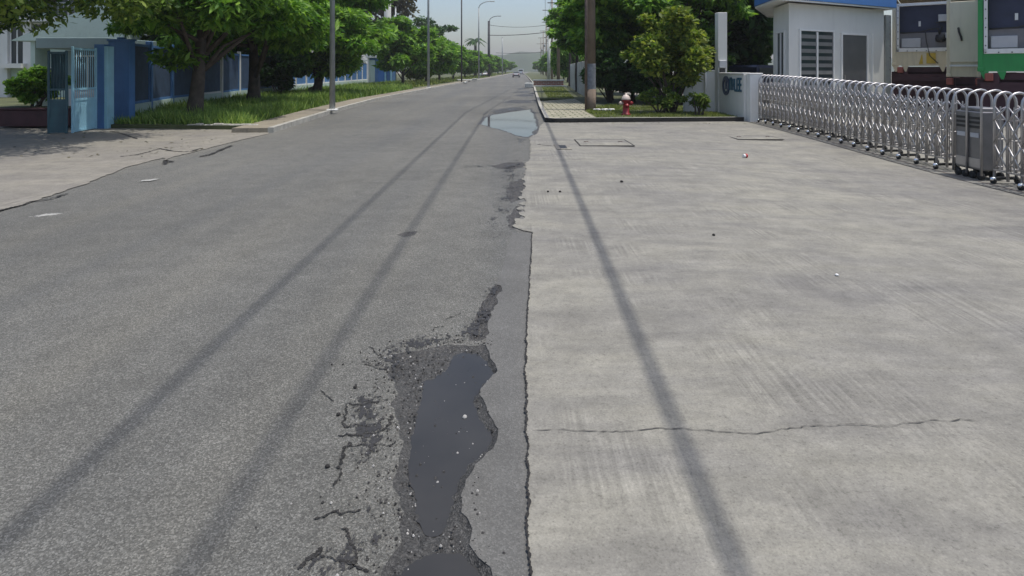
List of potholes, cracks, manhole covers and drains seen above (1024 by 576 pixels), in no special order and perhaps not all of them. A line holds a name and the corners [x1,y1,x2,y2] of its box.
pothole [506,179,526,203]
crack [111,131,233,164]
pothole [478,109,540,138]
pothole [381,344,498,576]
crack [321,390,396,485]
pothole [469,285,502,341]
pothole [506,205,524,230]
crack [297,509,369,572]
crack [545,419,980,434]
